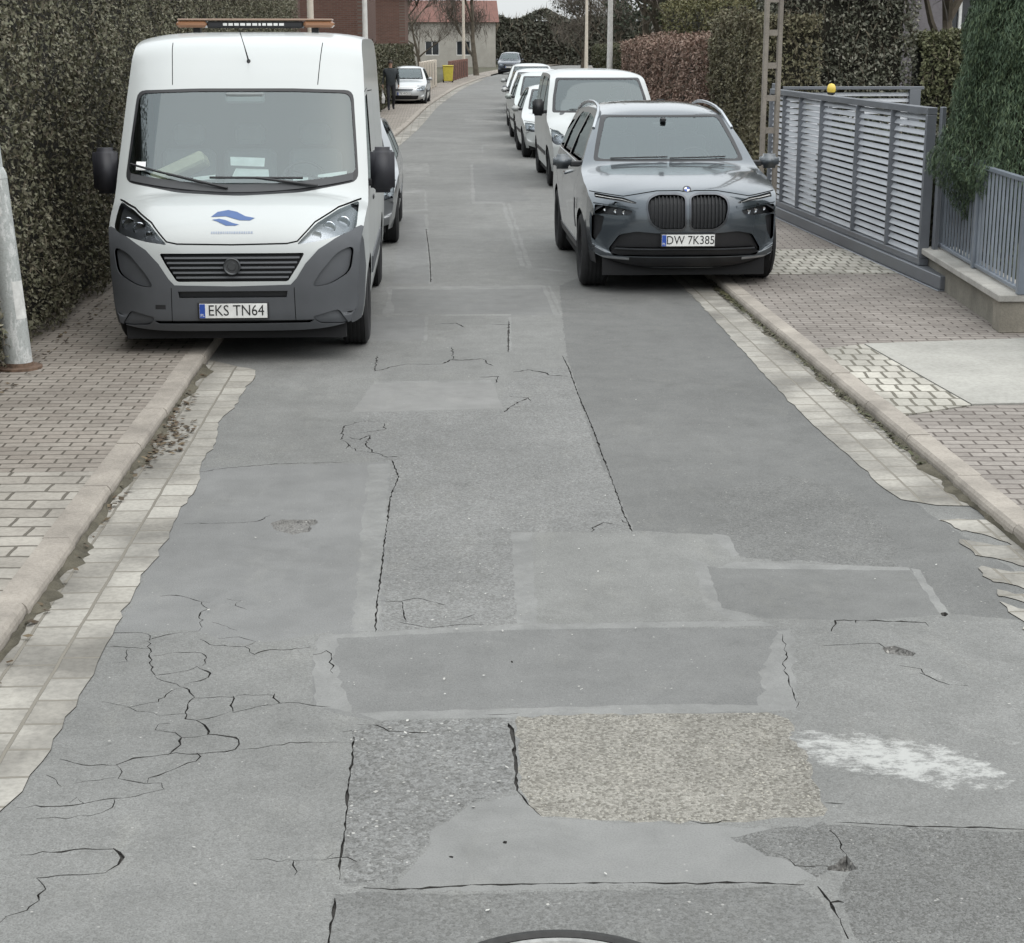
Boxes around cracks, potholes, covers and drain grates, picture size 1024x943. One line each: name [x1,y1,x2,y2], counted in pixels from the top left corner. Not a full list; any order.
pothole [270,519,318,535]
crack [825,620,927,647]
pothole [827,856,858,872]
crack [374,321,560,412]
pothole [883,646,916,656]
crack [19,595,346,819]
crack [364,822,1024,939]
manhole cover [478,930,641,943]
crack [2,848,125,921]
